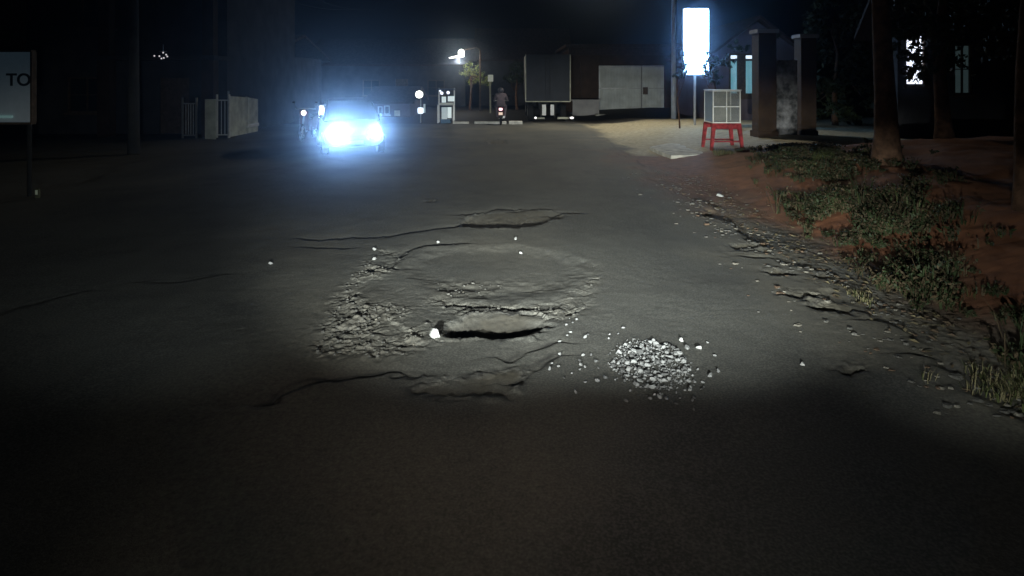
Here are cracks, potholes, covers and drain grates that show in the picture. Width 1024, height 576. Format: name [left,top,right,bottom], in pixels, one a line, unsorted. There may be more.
crack [303,237,375,249]
pothole [439,311,556,340]
crack [253,370,424,409]
pothole [458,209,565,228]
crack [148,274,219,284]
crack [0,289,90,316]
pothole [836,363,869,377]
crack [506,343,562,385]
